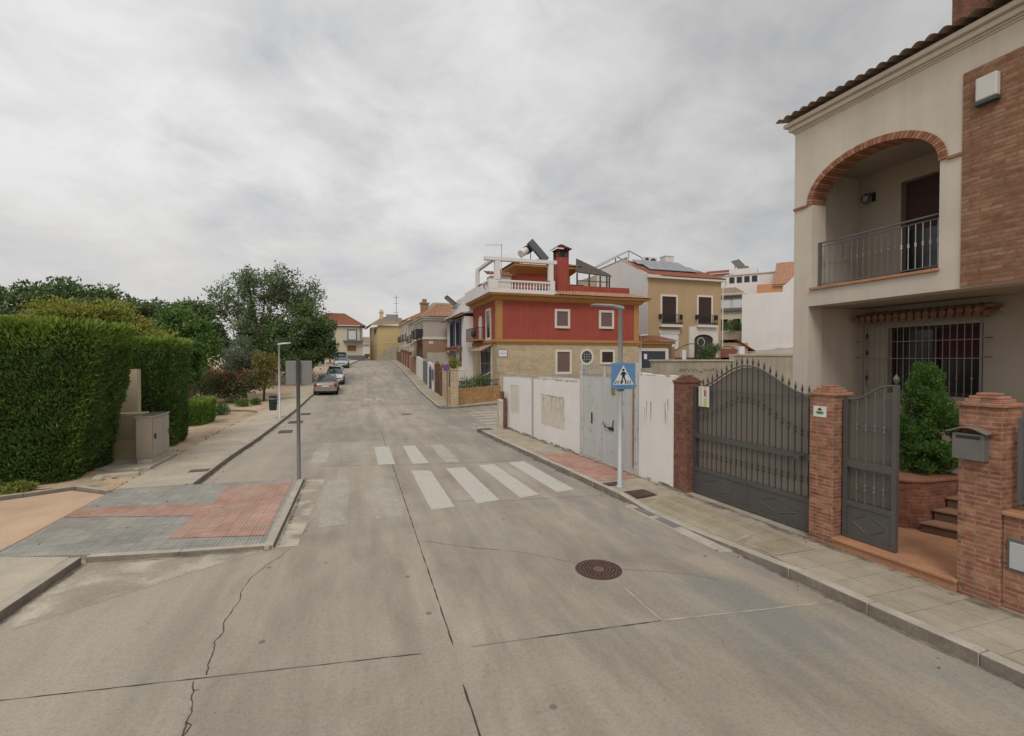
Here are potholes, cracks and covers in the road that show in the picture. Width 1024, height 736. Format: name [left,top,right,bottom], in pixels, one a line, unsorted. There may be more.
manhole cover [575,559,622,580]
utility cover [624,489,657,498]
crack [181,523,310,736]
